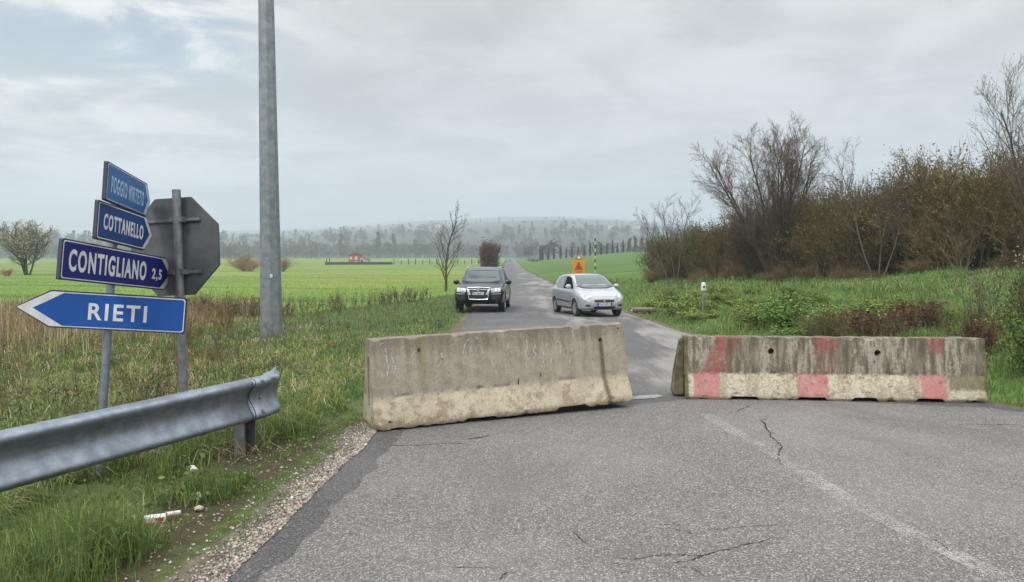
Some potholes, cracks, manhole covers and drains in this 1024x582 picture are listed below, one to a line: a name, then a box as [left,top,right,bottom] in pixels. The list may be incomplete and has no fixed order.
crack [740,406,784,465]
crack [620,524,793,576]
